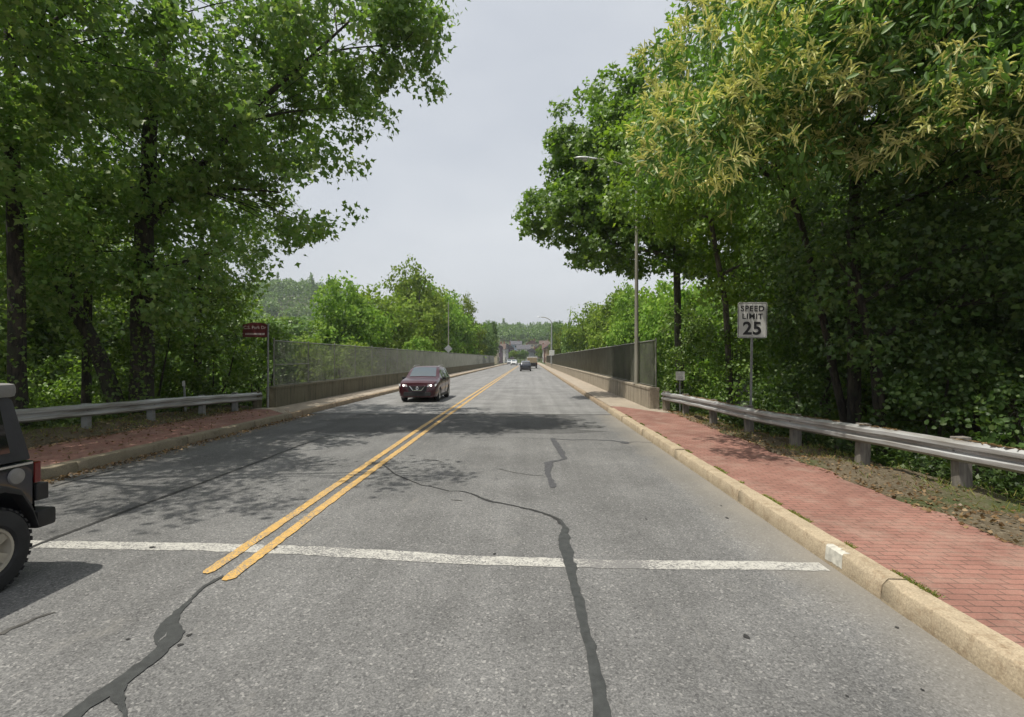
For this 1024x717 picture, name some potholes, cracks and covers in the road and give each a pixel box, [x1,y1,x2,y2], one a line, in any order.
crack [0,612,54,634]
crack [384,465,561,524]
